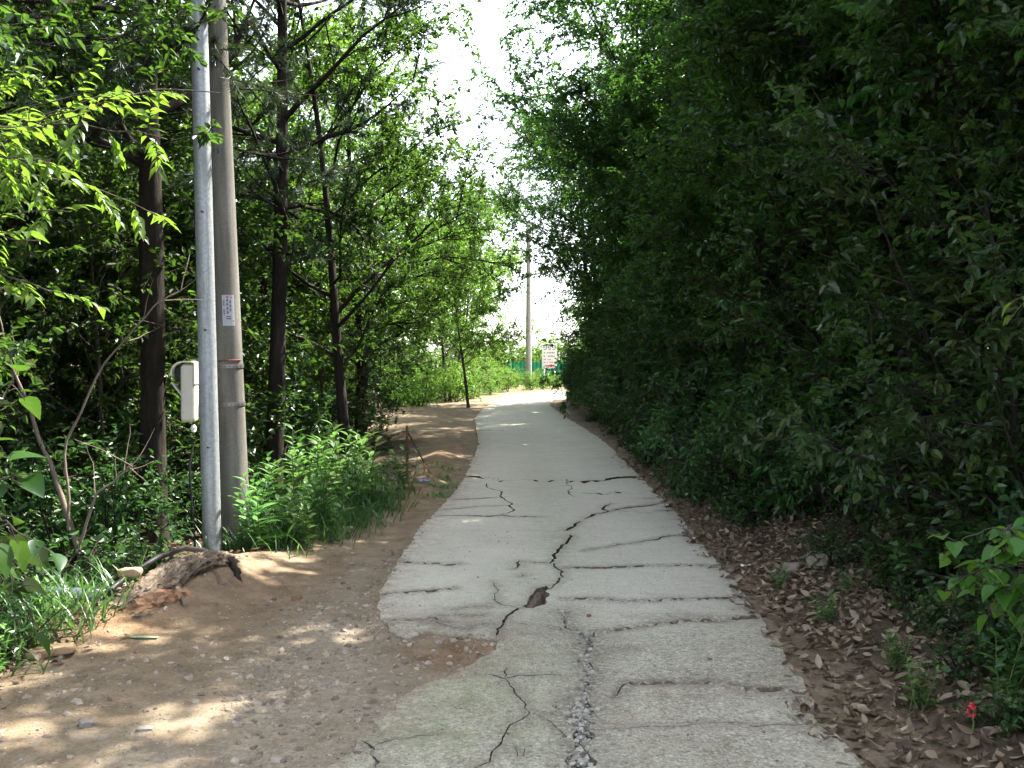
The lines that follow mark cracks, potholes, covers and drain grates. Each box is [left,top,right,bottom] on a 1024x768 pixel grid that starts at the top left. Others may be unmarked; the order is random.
crack [614,681,805,698]
crack [475,668,535,768]
pothole [523,586,550,608]
crack [614,616,758,631]
crack [362,735,425,768]
crack [493,583,519,636]
crack [456,476,743,602]
